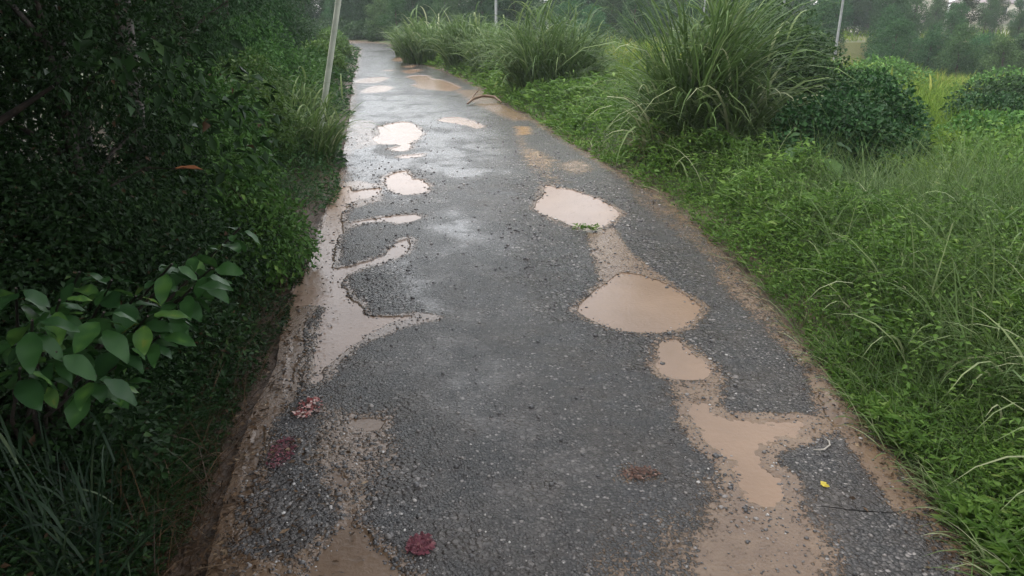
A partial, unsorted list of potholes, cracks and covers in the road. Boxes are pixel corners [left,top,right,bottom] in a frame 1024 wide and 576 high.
pothole [383,171,430,195]
pothole [348,417,387,431]
pothole [684,399,811,510]
pothole [407,75,460,91]
pothole [654,338,715,380]
pothole [438,117,485,129]
pothole [360,85,392,93]
pothole [577,272,702,333]
pothole [288,186,420,385]
pothole [533,185,621,229]
pothole [302,504,414,576]
pothole [371,122,423,151]
